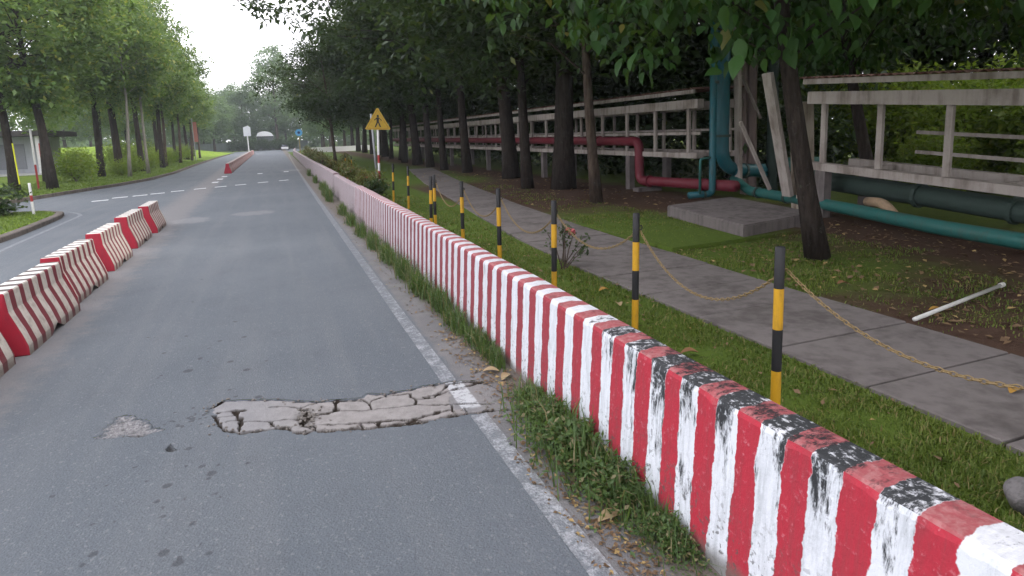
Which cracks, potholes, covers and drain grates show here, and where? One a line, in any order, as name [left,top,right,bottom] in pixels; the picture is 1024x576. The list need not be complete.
pothole [94,415,165,440]
crack [203,379,525,436]
